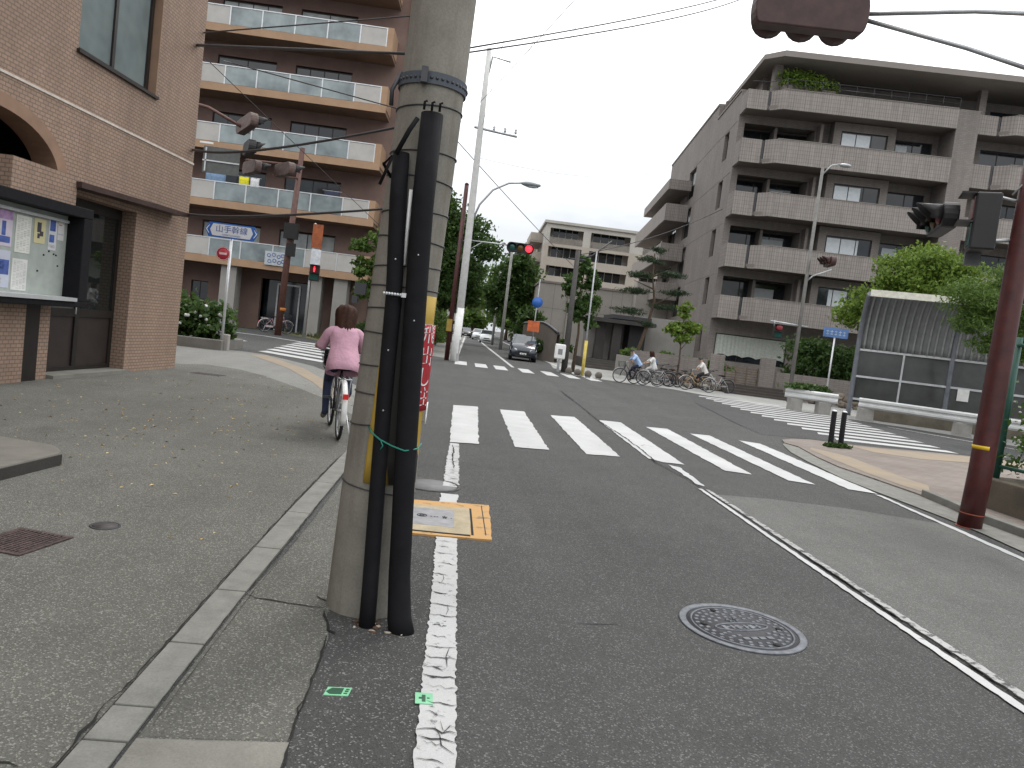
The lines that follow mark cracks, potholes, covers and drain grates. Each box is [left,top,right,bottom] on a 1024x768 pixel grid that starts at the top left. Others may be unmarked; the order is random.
utility cover [89,521,121,530]
manhole cover [679,603,808,655]
utility cover [412,500,492,541]
manhole cover [415,478,461,492]
drain grate [0,527,74,557]
